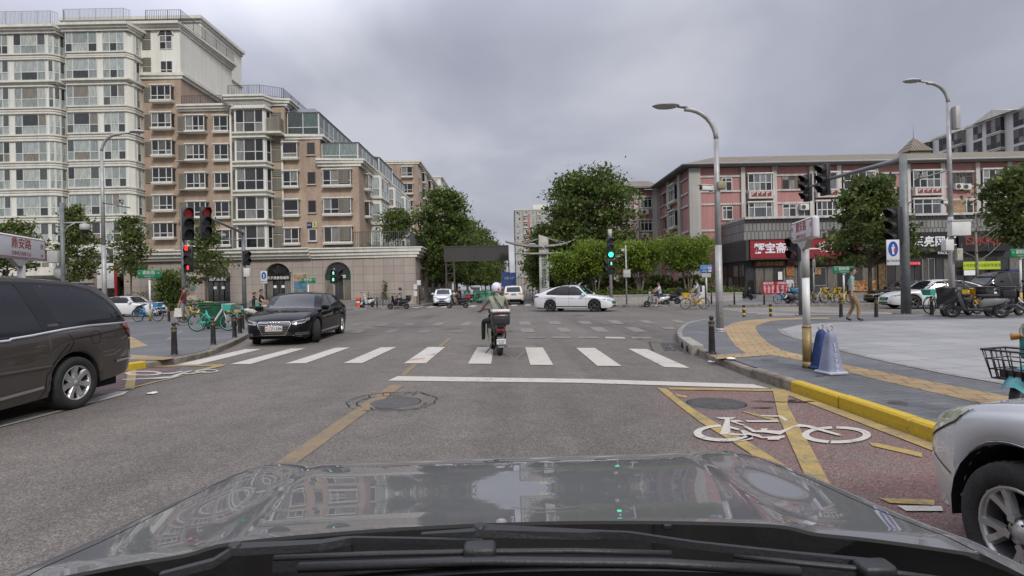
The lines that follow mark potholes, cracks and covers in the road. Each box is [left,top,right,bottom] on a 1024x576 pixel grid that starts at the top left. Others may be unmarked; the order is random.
manhole cover [370,397,423,409]
manhole cover [684,397,749,411]
drain grate [660,342,683,351]
